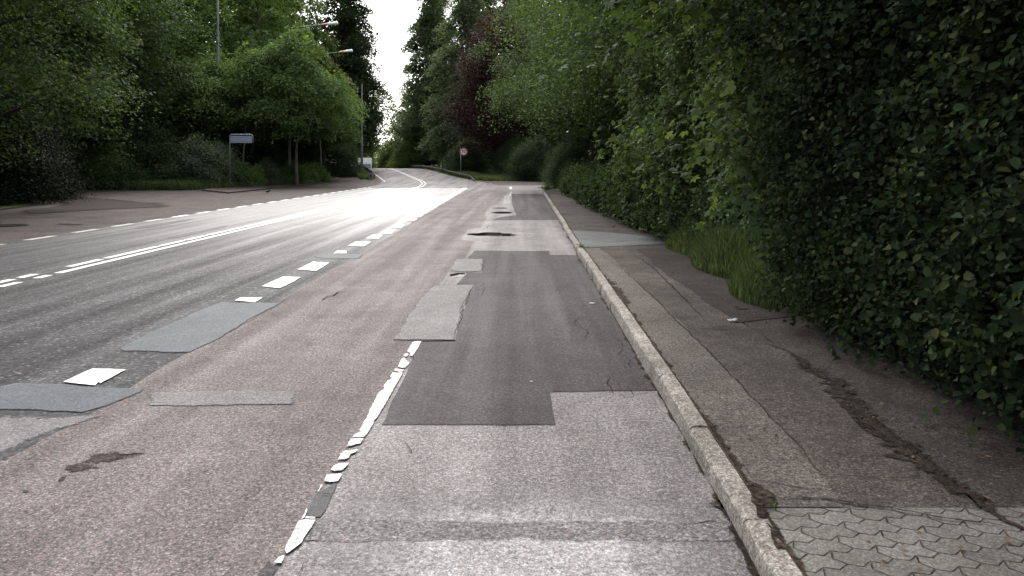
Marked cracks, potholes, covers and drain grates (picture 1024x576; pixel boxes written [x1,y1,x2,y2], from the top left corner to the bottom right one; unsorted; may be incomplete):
pothole [91,453,145,462]
